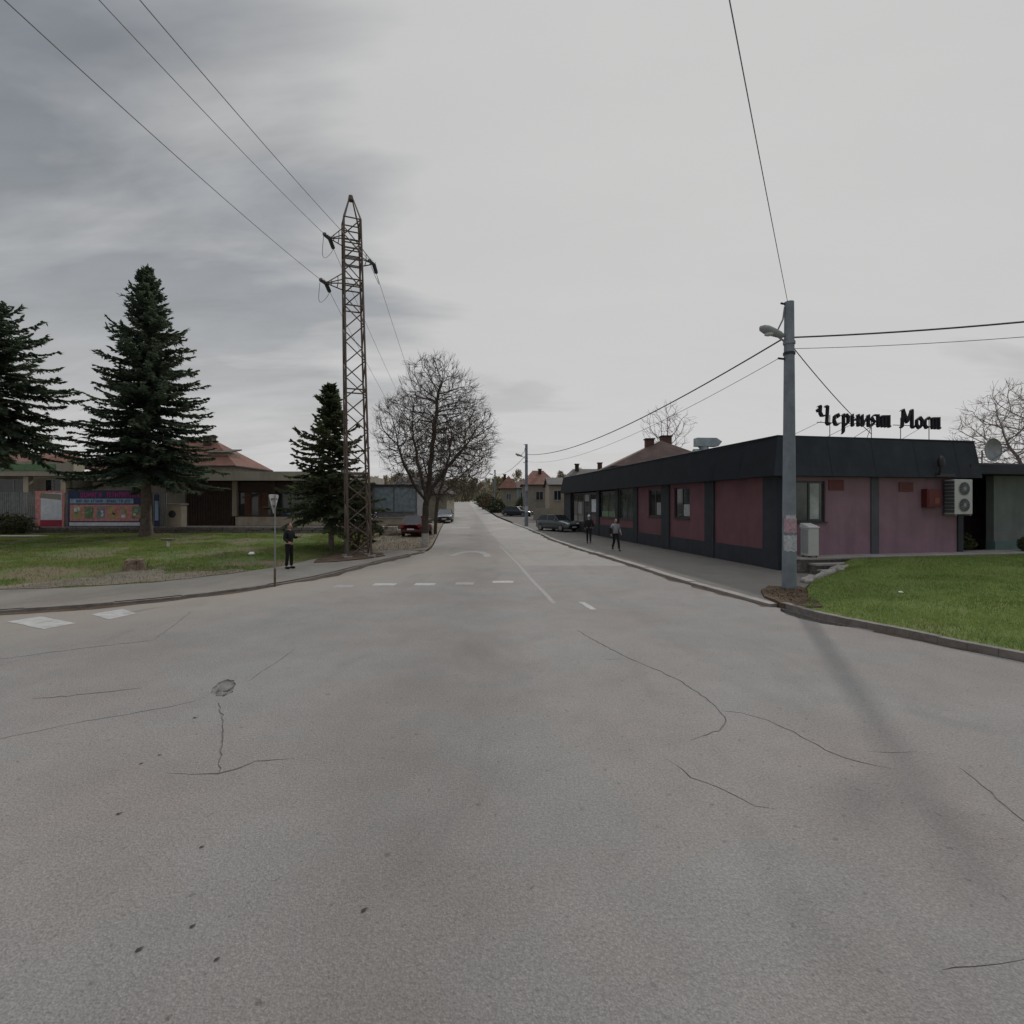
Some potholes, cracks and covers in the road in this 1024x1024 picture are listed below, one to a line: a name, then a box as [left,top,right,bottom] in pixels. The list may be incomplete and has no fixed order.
crack [1,700,197,739]
crack [36,688,138,699]
crack [579,631,892,769]
crack [943,959,1024,970]
crack [173,703,283,775]
crack [665,758,773,809]
crack [962,769,1024,821]
pothole [210,679,236,696]
